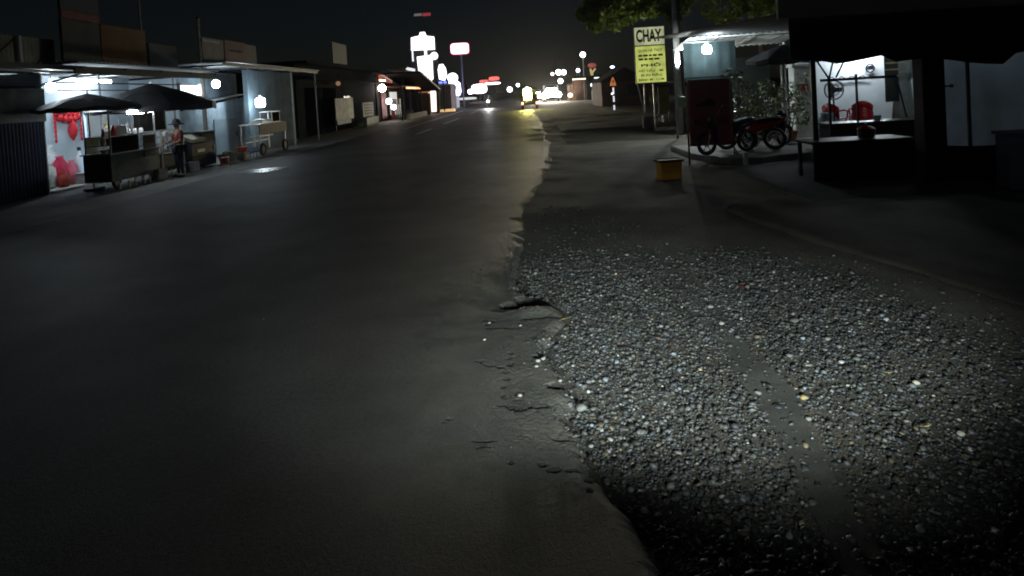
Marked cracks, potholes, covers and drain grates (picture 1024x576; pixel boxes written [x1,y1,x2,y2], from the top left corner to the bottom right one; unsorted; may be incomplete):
pothole [499,296,543,310]
pothole [546,382,572,396]
pothole [539,462,581,474]
pothole [504,400,549,412]
